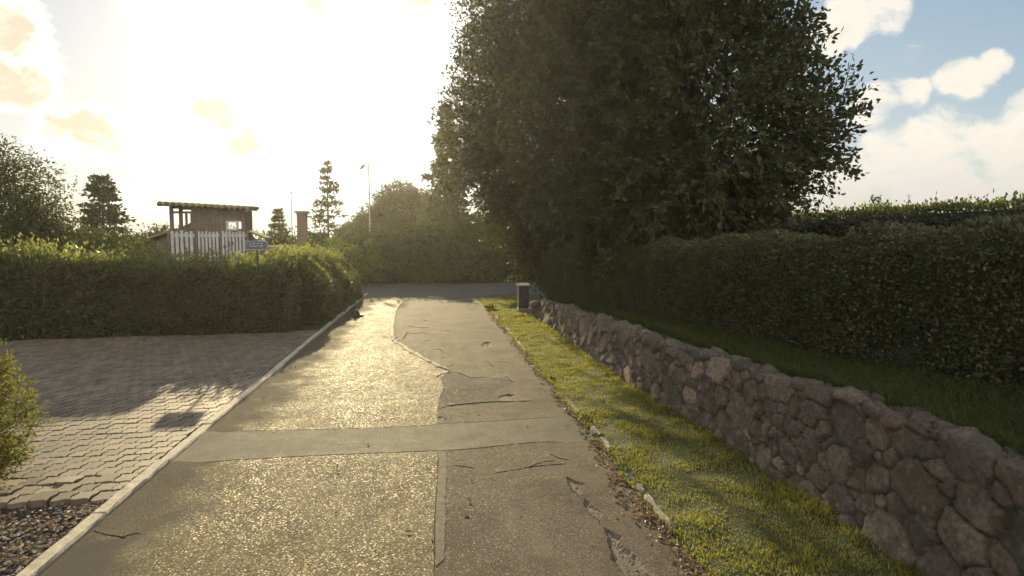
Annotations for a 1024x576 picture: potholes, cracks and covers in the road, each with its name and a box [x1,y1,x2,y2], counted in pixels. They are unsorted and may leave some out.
crack [180,441,577,474]
crack [403,320,513,382]
crack [92,530,140,538]
